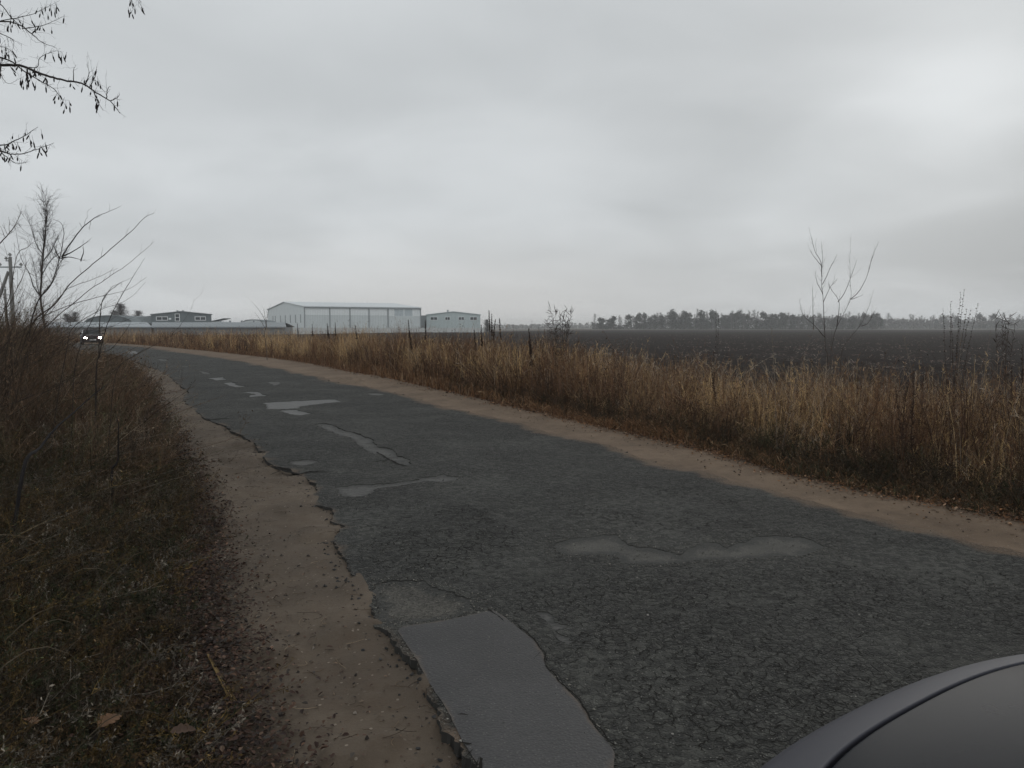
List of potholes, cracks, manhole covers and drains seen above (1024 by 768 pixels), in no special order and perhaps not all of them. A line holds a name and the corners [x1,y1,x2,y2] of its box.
crack [270,467,333,475]
crack [337,501,536,588]
crack [483,560,1024,767]
